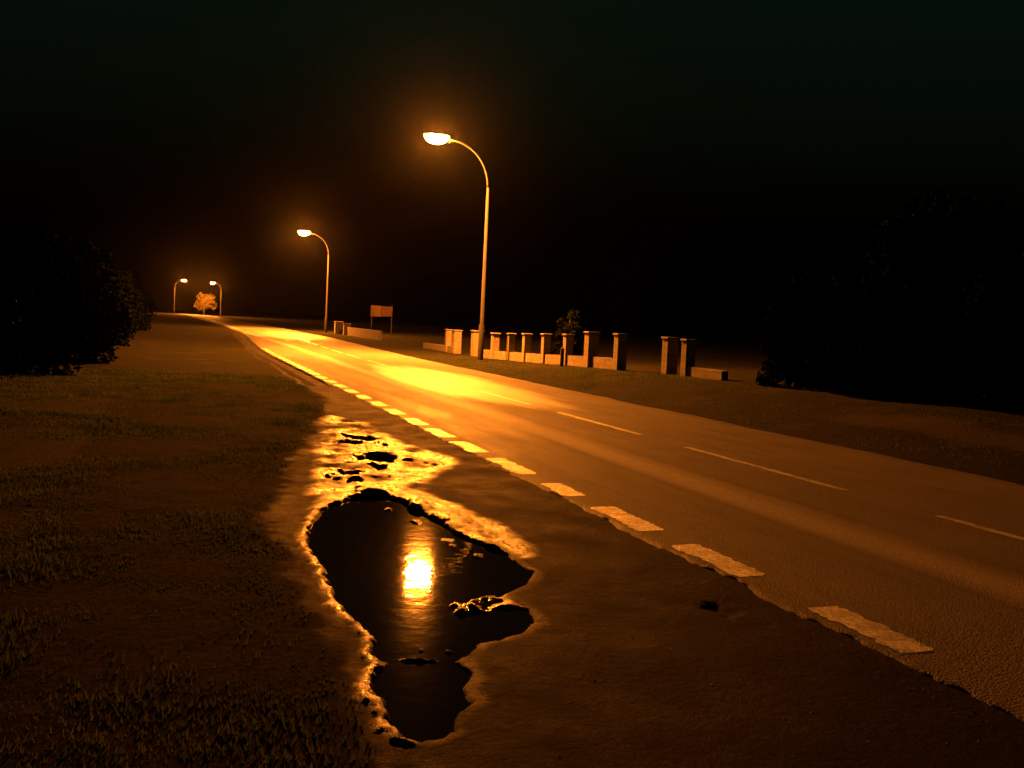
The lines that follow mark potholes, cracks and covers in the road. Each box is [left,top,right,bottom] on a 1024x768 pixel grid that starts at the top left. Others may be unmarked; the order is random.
pothole [339,450,413,465]
pothole [327,467,373,480]
pothole [282,486,570,757]
pothole [330,431,390,444]
